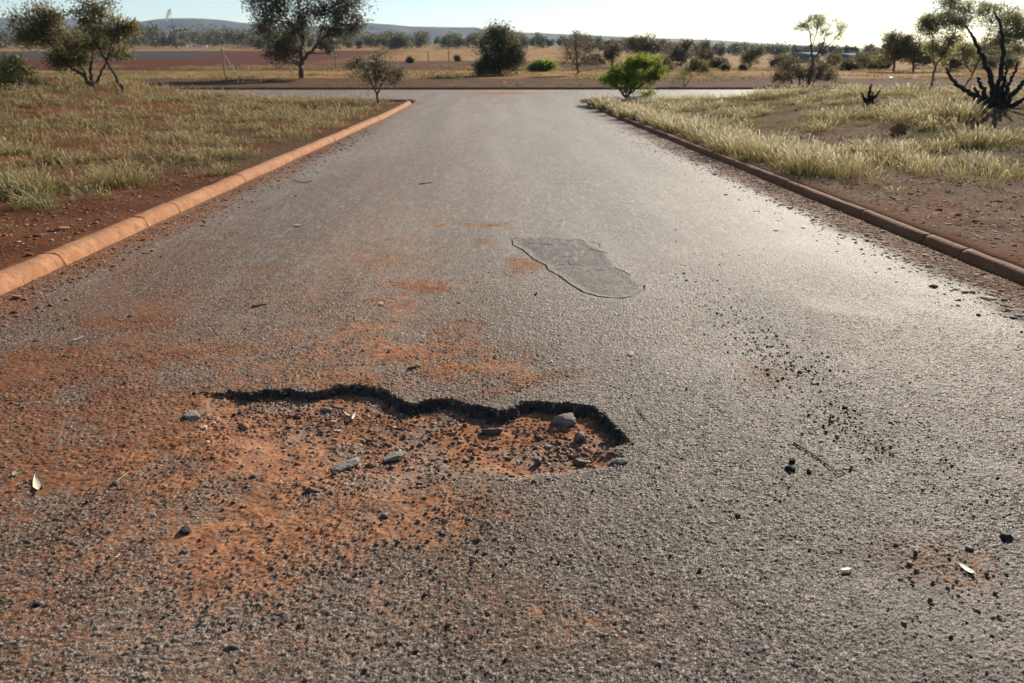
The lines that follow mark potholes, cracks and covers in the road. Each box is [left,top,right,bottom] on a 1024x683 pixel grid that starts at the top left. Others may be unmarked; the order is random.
pothole [187,383,635,499]
